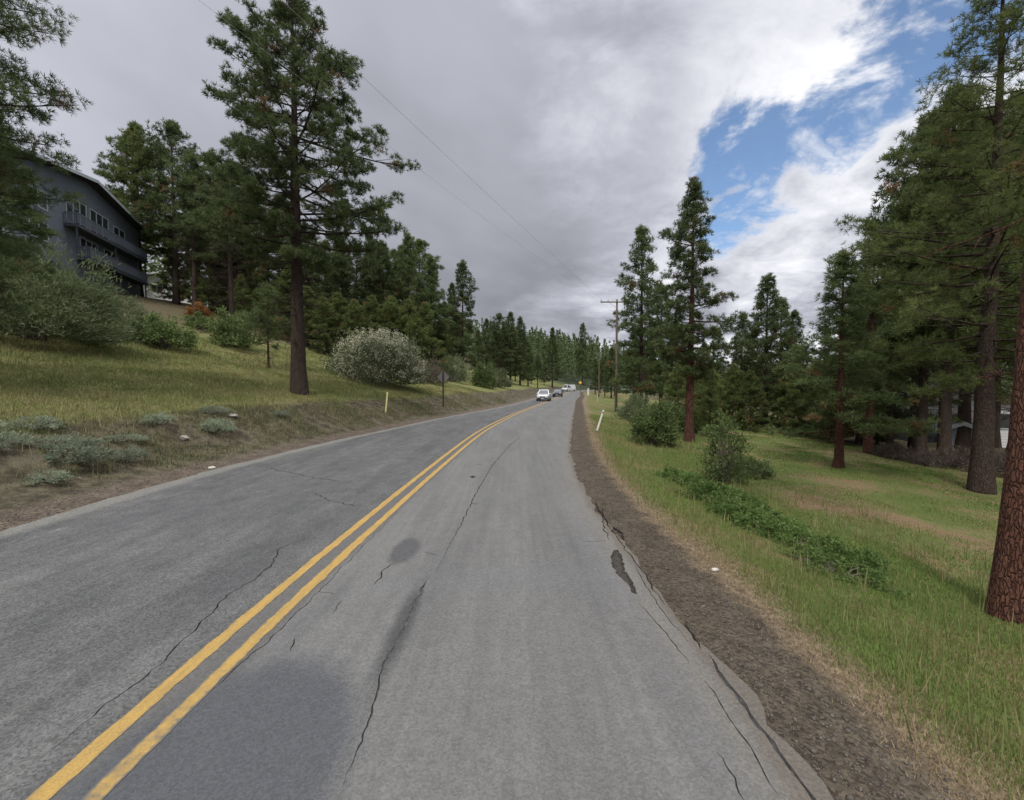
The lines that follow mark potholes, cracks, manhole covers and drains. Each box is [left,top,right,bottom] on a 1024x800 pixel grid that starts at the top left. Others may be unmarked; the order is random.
pothole [611,550,637,594]
crack [586,499,816,800]
